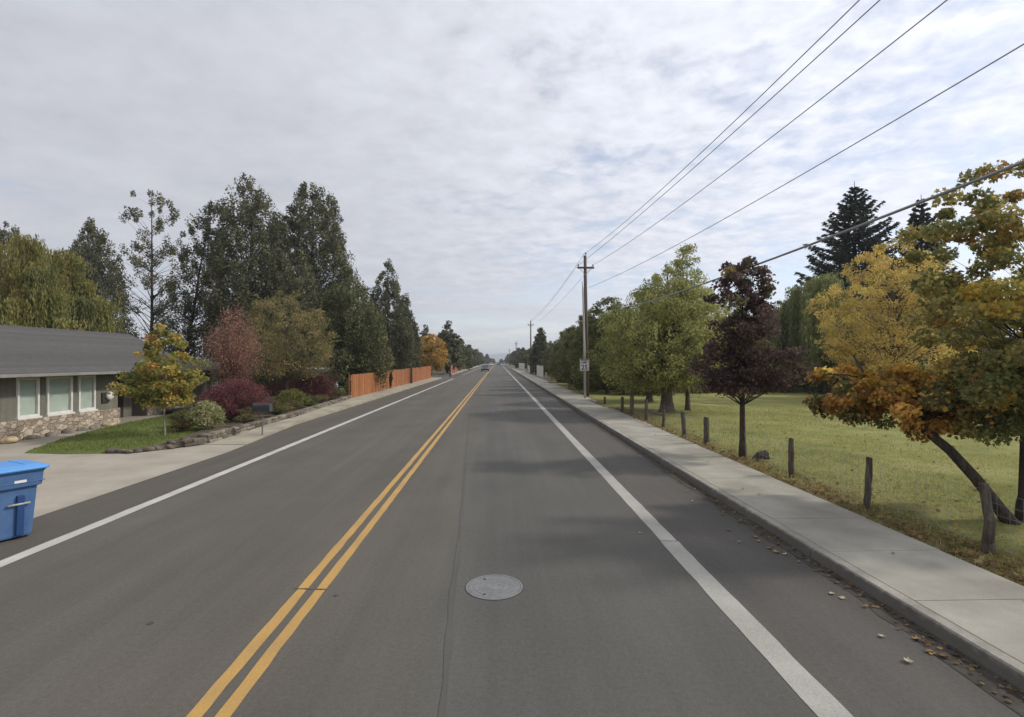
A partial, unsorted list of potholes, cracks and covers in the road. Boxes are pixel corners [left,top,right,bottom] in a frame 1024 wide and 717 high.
manhole cover [465,574,524,601]
